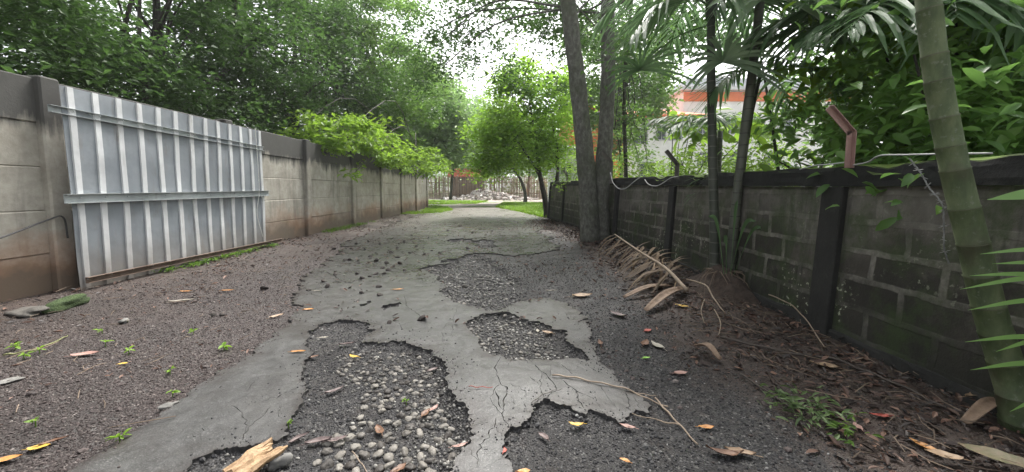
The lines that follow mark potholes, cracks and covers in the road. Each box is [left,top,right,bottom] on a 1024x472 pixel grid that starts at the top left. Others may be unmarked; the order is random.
pothole [188,322,473,472]
crack [471,359,582,464]
pothole [423,254,531,311]
pothole [505,402,655,472]
pothole [467,314,588,361]
